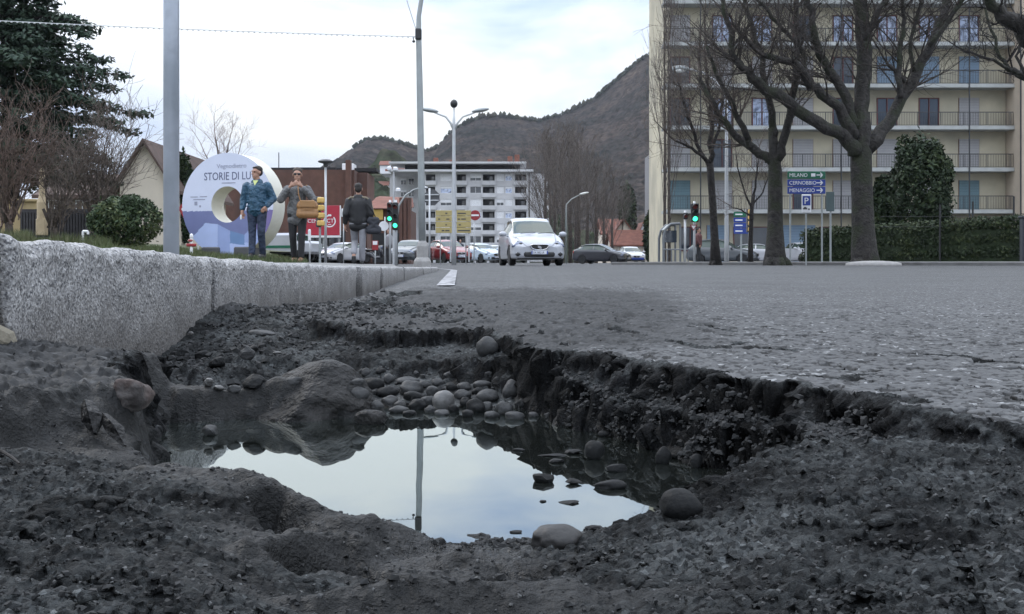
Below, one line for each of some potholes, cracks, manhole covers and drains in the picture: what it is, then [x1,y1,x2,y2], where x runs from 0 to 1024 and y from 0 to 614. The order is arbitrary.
crack [849,332,1024,364]
pothole [0,309,1024,614]
pothole [352,296,399,307]
crack [608,324,805,352]
pothole [391,305,450,314]
